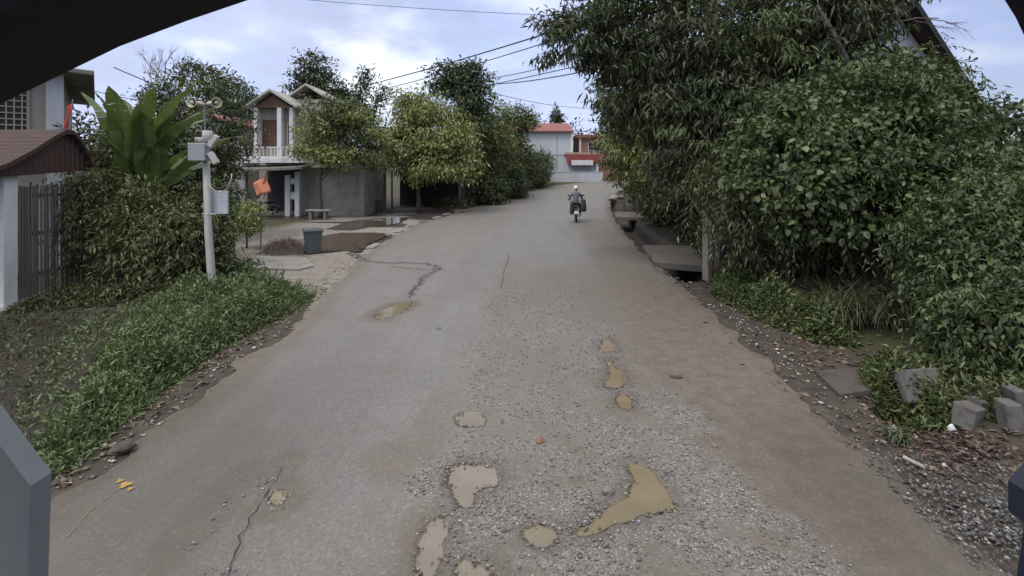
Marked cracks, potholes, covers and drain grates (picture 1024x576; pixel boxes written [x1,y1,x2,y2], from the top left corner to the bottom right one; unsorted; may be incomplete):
pothole [609,391,639,411]
crack [344,252,446,297]
pothole [437,549,505,576]
pothole [439,459,508,513]
pothole [368,301,417,321]
pothole [556,458,685,541]
pothole [595,338,621,353]
pothole [513,517,574,556]
pothole [257,485,296,511]
pothole [448,407,493,430]
pothole [599,356,631,391]
pothole [401,509,462,576]
